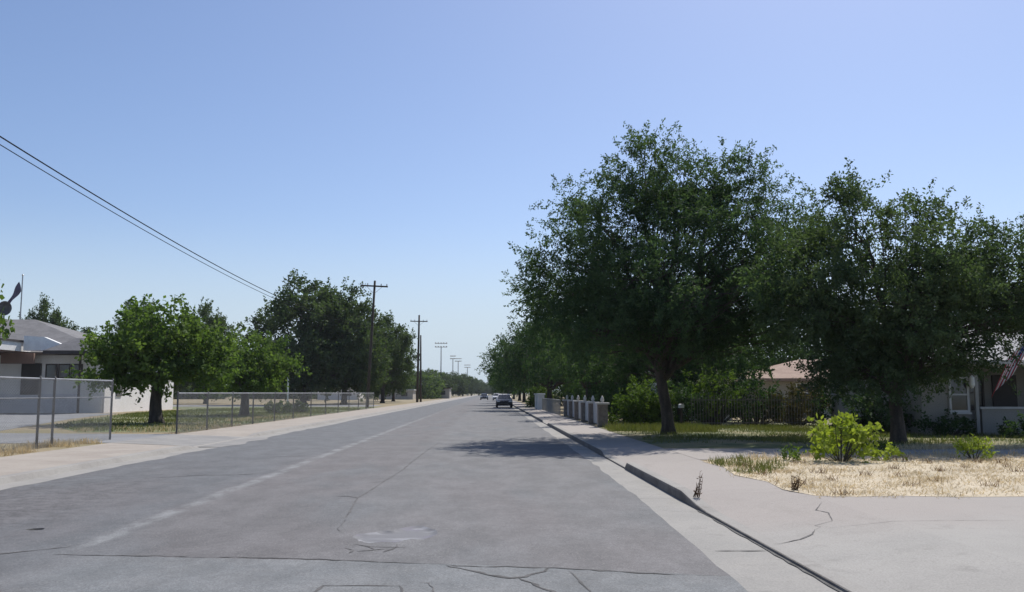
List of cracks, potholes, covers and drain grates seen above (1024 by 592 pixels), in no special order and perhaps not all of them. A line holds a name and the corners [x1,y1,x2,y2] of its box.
crack [776,502,938,544]
crack [0,544,718,592]
crack [335,443,438,530]
